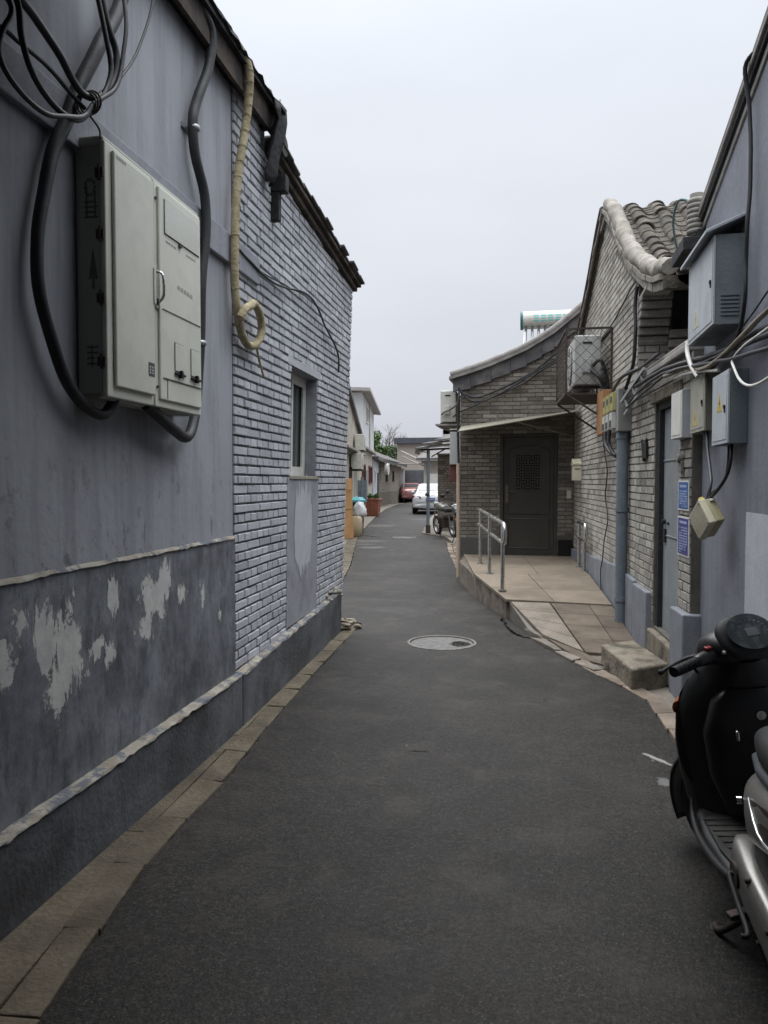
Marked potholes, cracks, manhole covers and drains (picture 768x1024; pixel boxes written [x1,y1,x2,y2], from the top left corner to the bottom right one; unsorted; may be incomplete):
manhole cover [407,635,477,650]
